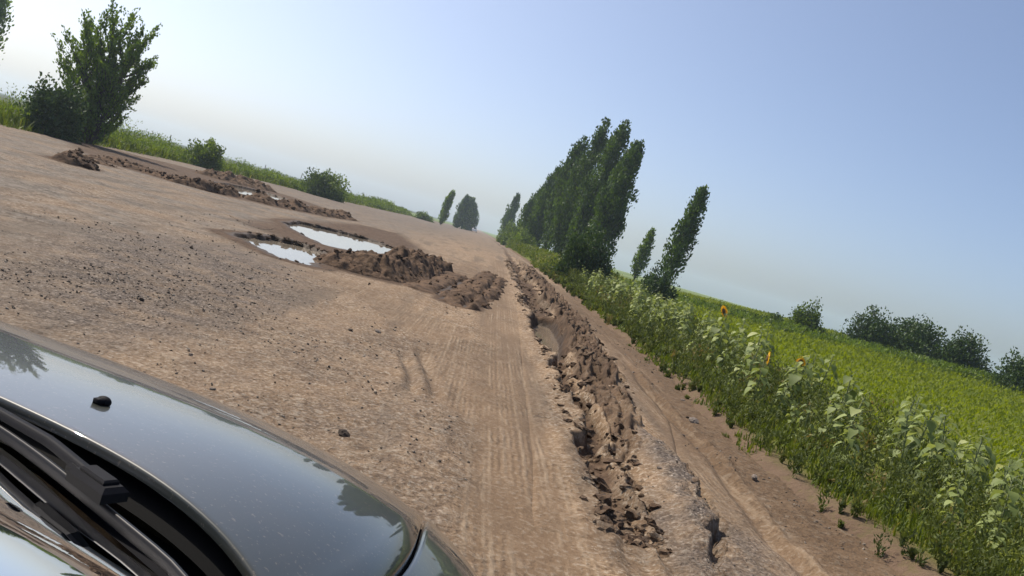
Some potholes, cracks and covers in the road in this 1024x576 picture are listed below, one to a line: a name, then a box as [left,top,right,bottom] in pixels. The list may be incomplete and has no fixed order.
pothole [530,313,572,361]
pothole [204,179,309,206]
pothole [273,219,394,254]
